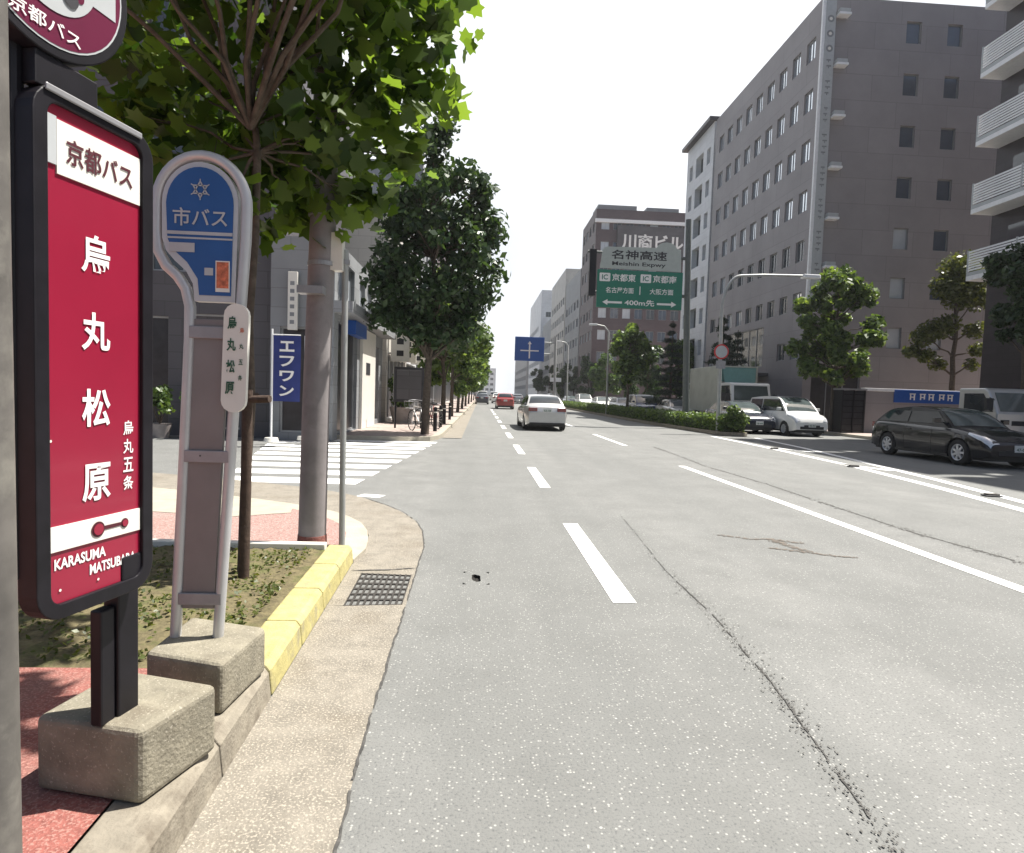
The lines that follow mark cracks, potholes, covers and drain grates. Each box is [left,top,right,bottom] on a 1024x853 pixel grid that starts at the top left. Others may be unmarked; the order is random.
crack [618,515,905,853]
drain grate [343,573,411,606]
